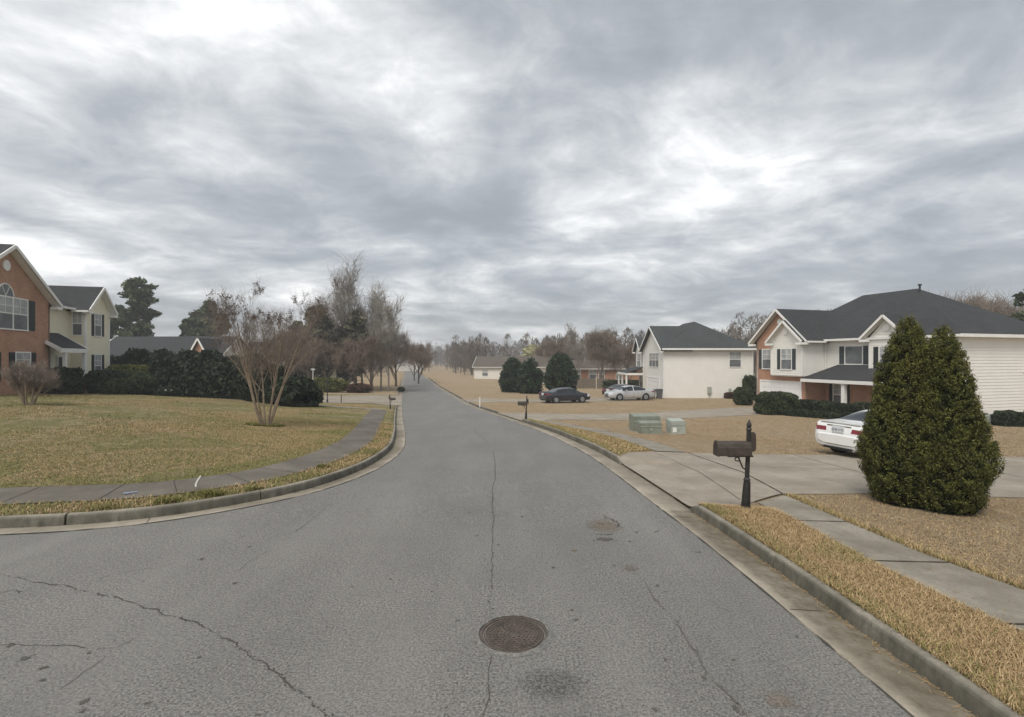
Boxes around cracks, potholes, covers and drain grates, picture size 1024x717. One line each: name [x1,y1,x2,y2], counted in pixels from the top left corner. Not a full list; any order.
crack [636,573,748,717]
manhole cover [474,615,554,658]
crack [6,575,334,717]
